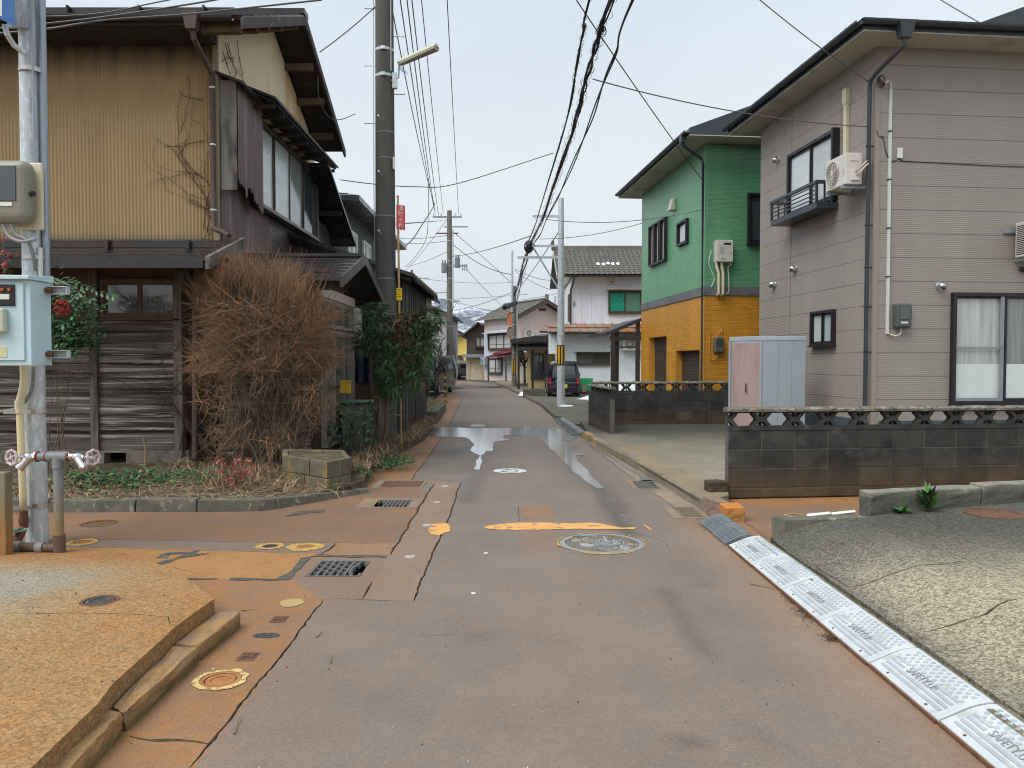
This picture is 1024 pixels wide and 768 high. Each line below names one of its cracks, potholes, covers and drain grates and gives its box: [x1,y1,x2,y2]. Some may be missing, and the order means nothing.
crack [815,560,969,587]
manhole cover [963,508,1024,519]
manhole cover [199,671,242,687]
crack [926,598,1023,632]
drain grate [305,560,370,577]
drain grate [626,480,663,490]
manhole cover [79,595,120,606]
manhole cover [560,533,645,553]
drain grate [355,498,424,509]
